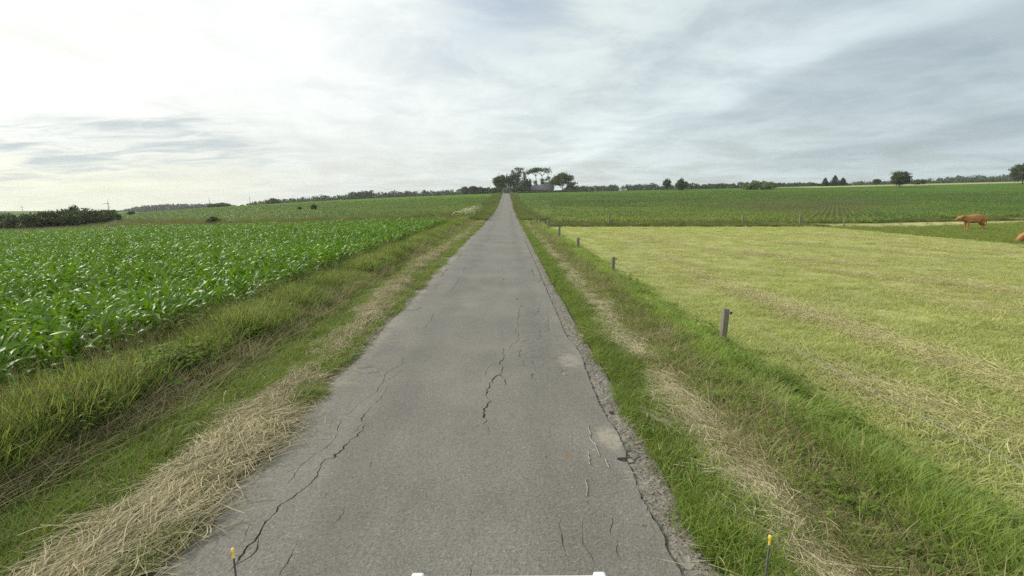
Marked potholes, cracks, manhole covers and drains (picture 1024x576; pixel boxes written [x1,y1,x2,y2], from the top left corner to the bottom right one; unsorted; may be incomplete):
crack [474,241,683,576]
crack [233,363,403,576]
